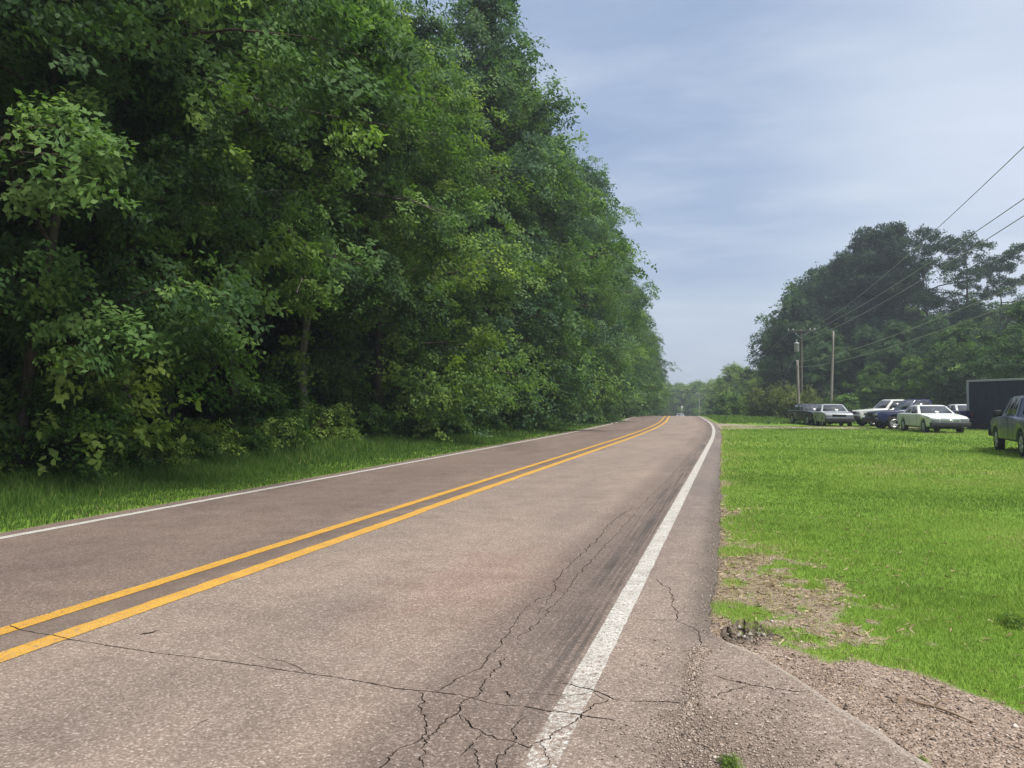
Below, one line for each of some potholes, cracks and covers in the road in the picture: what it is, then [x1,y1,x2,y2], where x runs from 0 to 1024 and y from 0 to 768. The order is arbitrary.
crack [11,450,694,768]
crack [711,675,810,698]
